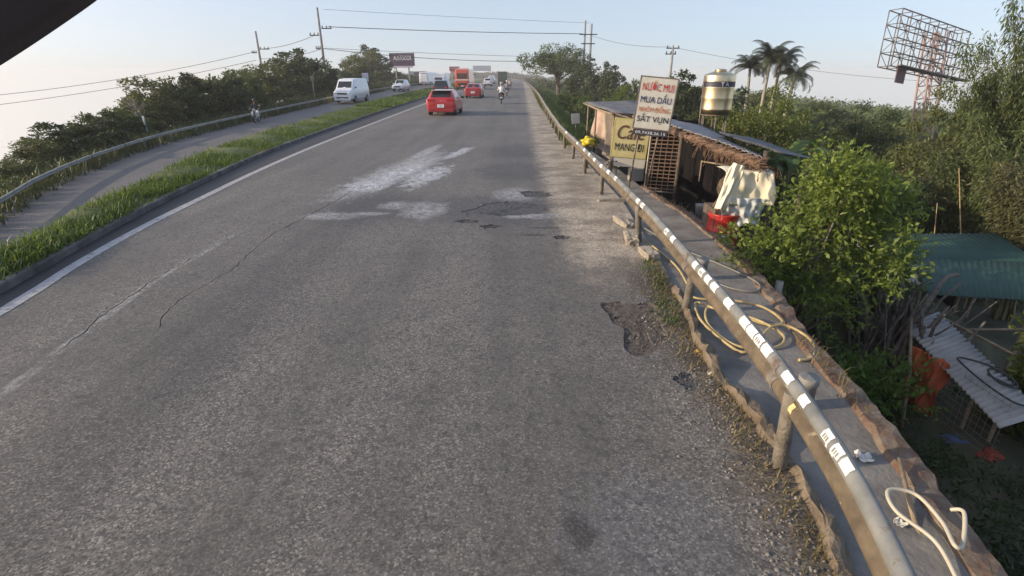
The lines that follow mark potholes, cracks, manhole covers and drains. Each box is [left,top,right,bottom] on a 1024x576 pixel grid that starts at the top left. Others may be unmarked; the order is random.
pothole [673,371,700,391]
pothole [600,301,671,356]
crack [53,189,355,357]
